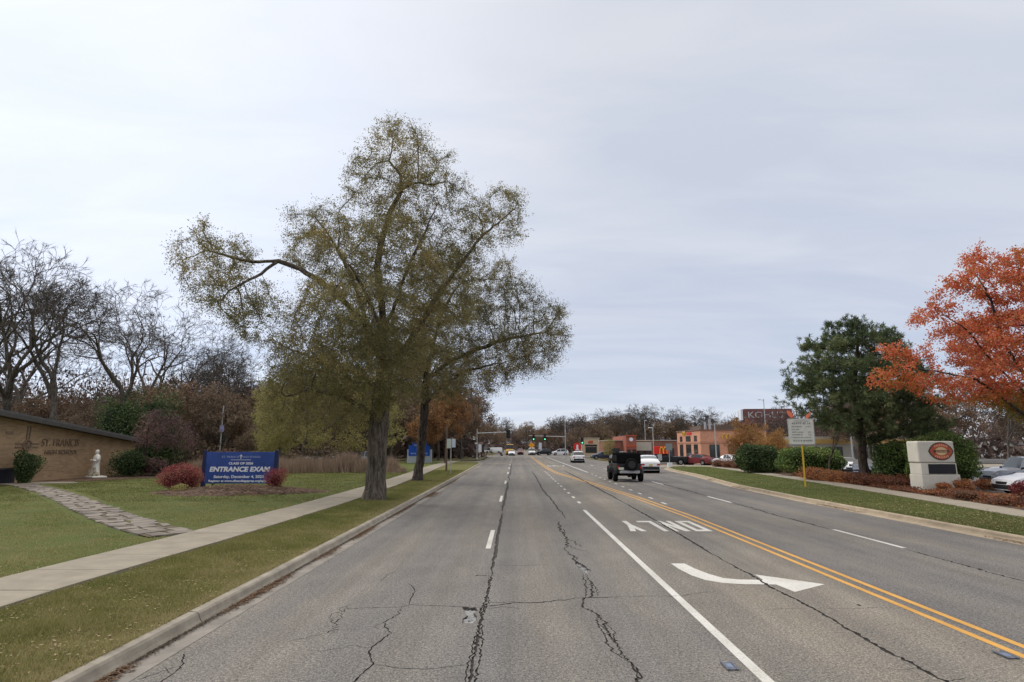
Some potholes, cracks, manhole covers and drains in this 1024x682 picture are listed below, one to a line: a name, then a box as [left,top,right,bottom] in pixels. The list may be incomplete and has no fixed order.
crack [288,472,964,682]
pothole [462,606,477,623]
